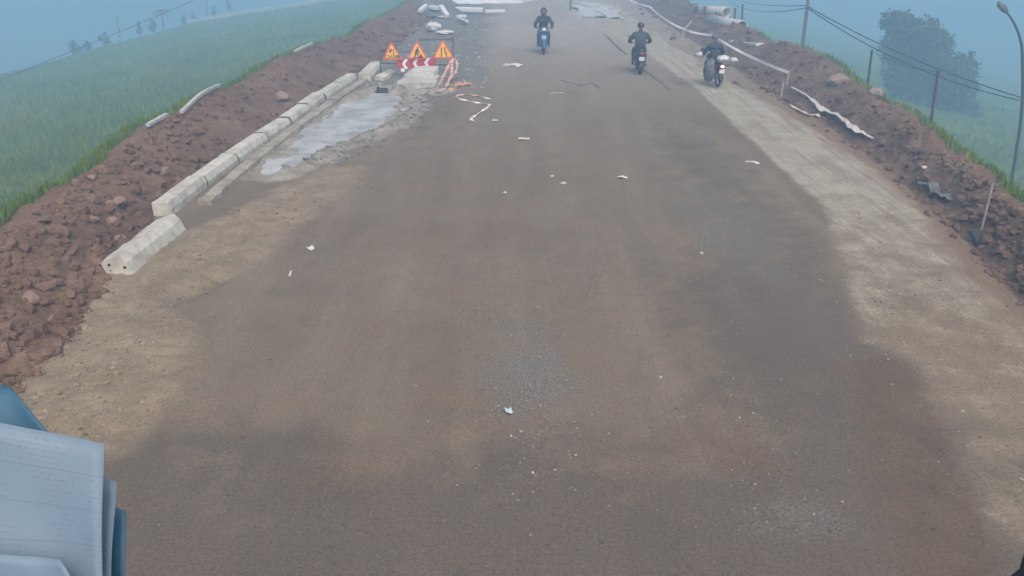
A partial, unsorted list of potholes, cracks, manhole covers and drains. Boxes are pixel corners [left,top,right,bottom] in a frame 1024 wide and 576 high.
crack [605,35,671,91]
crack [546,80,601,94]
